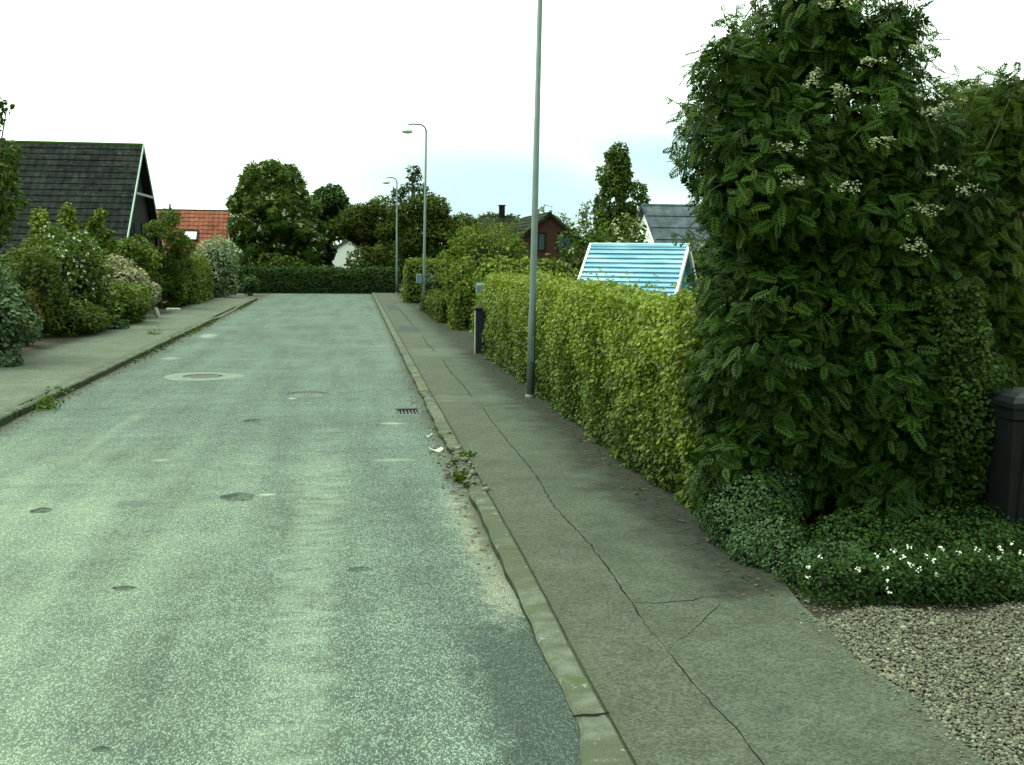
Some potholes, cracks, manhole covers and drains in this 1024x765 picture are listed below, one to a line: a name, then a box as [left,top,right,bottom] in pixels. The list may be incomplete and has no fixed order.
pothole [219,492,255,501]
crack [399,309,765,765]
manhole cover [164,372,245,381]
